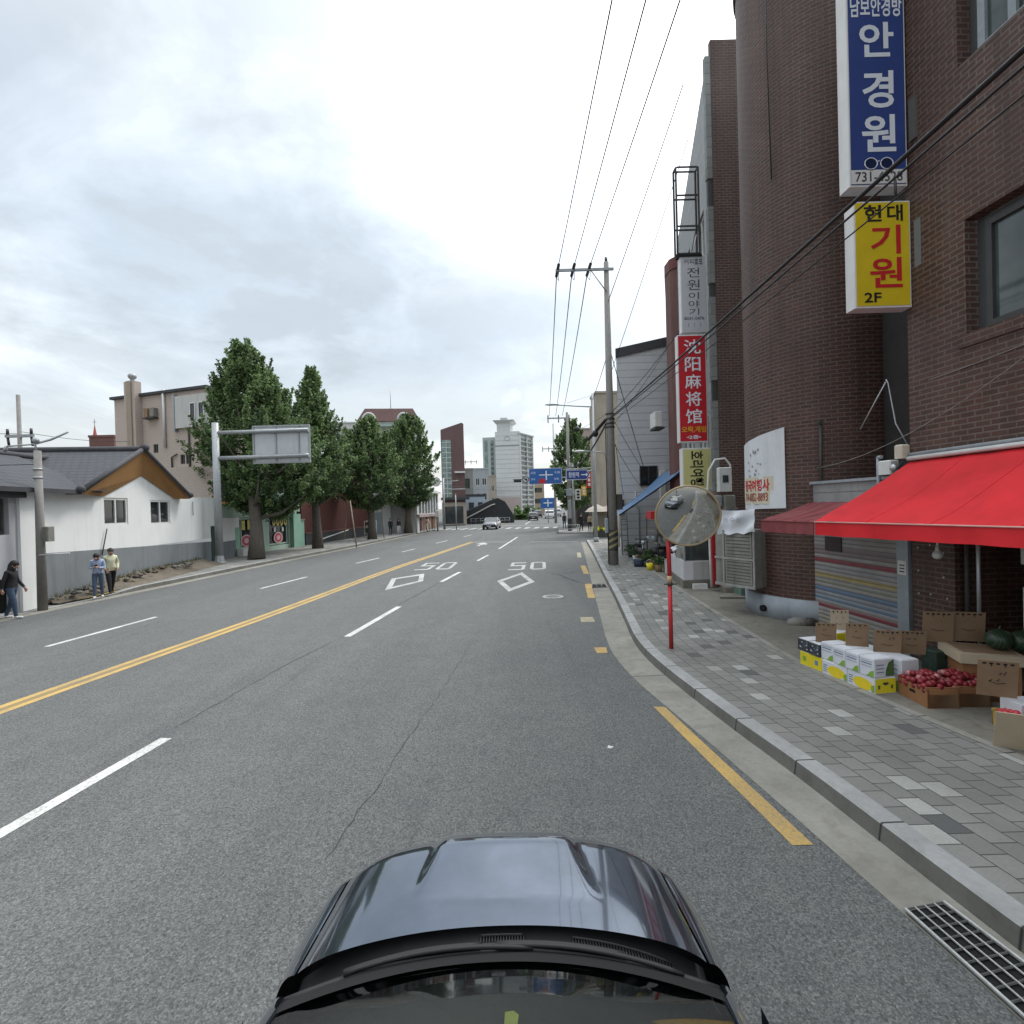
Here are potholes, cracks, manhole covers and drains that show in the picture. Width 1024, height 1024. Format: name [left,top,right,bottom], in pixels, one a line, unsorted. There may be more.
crack [335,626,482,848]
drain grate [904,900,1024,1019]
